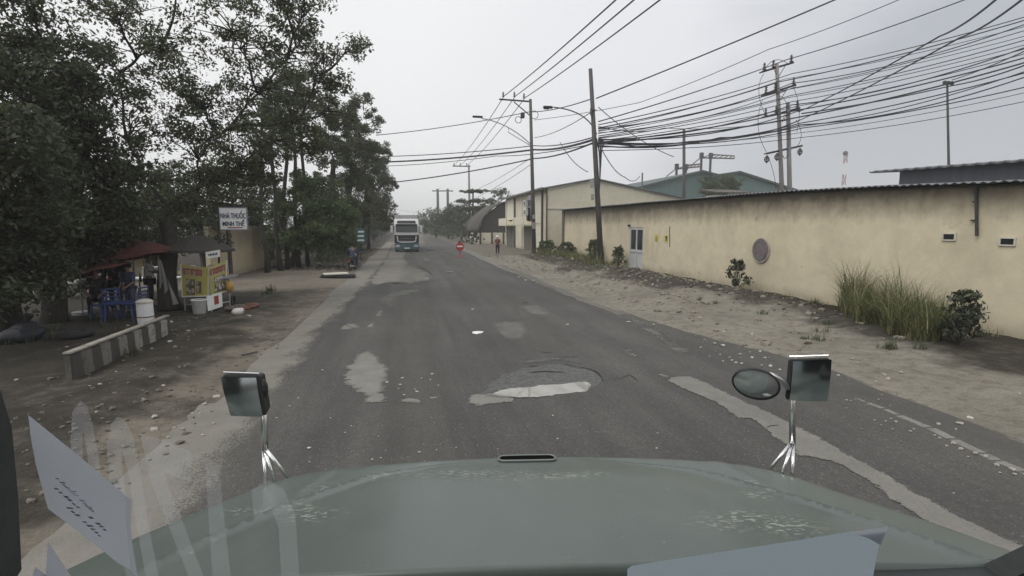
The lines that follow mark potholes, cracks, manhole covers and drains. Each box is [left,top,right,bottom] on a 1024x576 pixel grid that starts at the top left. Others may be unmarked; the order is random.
crack [535,351,637,380]
pothole [483,364,604,394]
